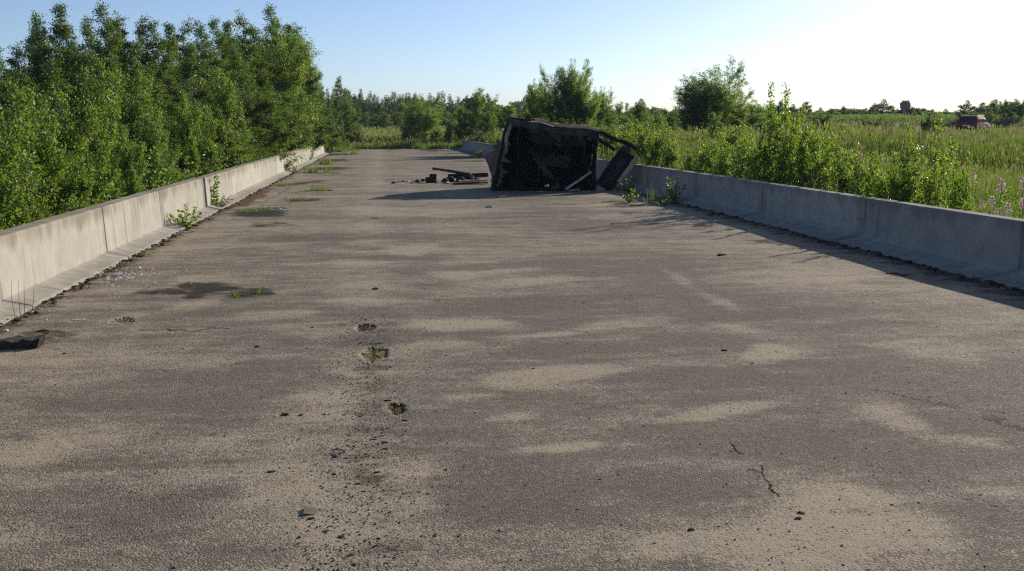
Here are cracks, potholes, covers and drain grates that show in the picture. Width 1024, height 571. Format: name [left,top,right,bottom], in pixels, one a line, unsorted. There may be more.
pothole [353,345,396,366]
pothole [376,401,415,419]
pothole [103,316,140,325]
pothole [349,322,383,334]
